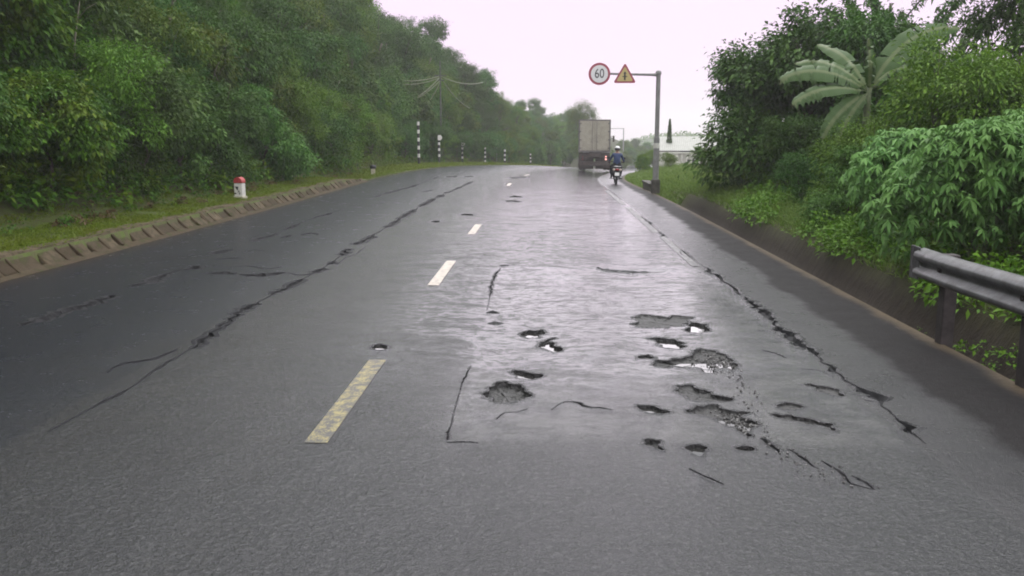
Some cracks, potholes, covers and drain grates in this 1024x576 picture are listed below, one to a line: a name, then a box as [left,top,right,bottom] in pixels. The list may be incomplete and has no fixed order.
pothole [678,442,712,457]
pothole [506,369,547,381]
pothole [638,437,667,451]
pothole [682,322,713,334]
crack [9,177,473,432]
crack [444,216,927,490]
pothole [633,404,676,415]
pothole [671,383,736,403]
pothole [649,348,743,374]
pothole [479,380,536,404]
pothole [535,337,566,353]
pothole [517,329,549,338]
